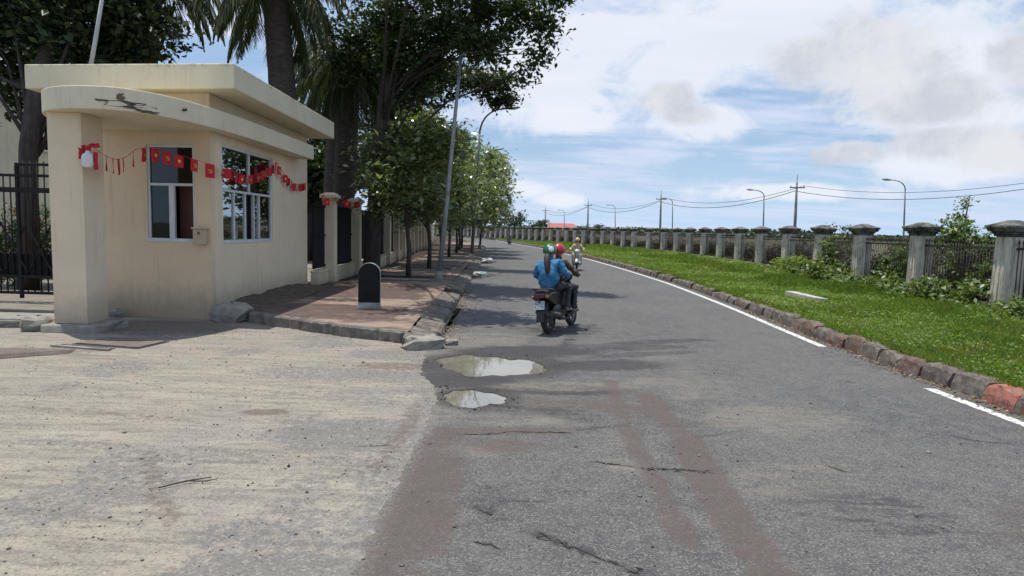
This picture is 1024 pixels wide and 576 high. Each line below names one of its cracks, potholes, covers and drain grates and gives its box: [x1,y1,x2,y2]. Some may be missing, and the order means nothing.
pothole [413,351,576,381]
pothole [425,385,519,412]
crack [475,507,643,576]
crack [595,461,714,473]
